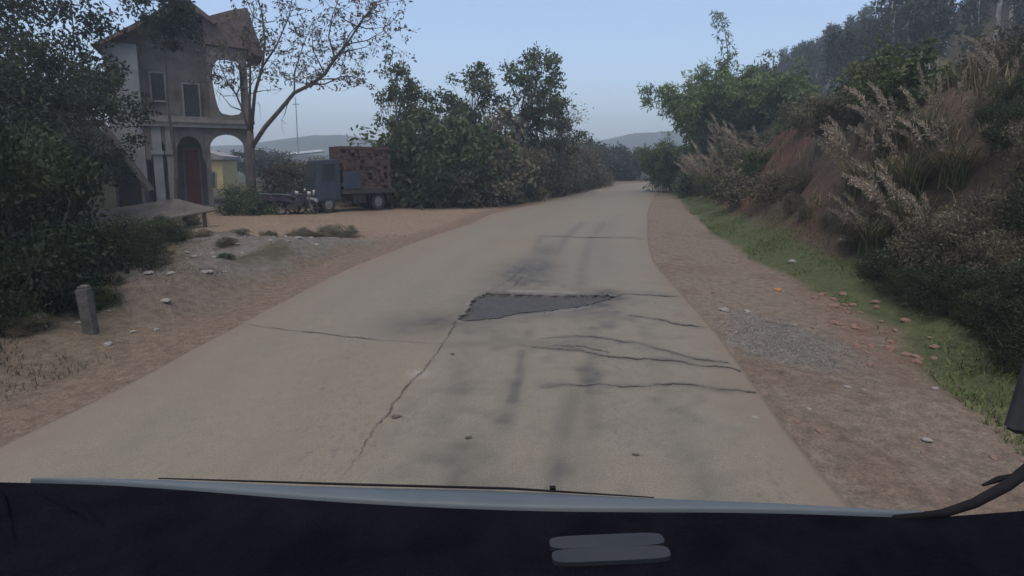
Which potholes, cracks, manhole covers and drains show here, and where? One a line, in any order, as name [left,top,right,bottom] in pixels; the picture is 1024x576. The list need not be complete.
crack [247,320,456,474]
crack [532,335,741,371]
